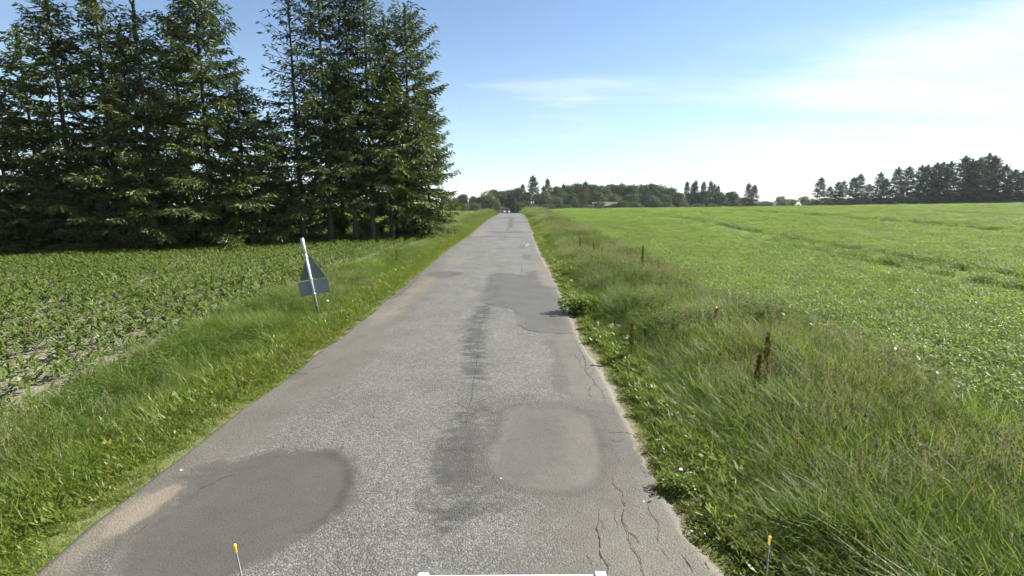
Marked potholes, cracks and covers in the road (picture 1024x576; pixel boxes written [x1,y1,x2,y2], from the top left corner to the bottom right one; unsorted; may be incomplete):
crack [588,478,645,576]
